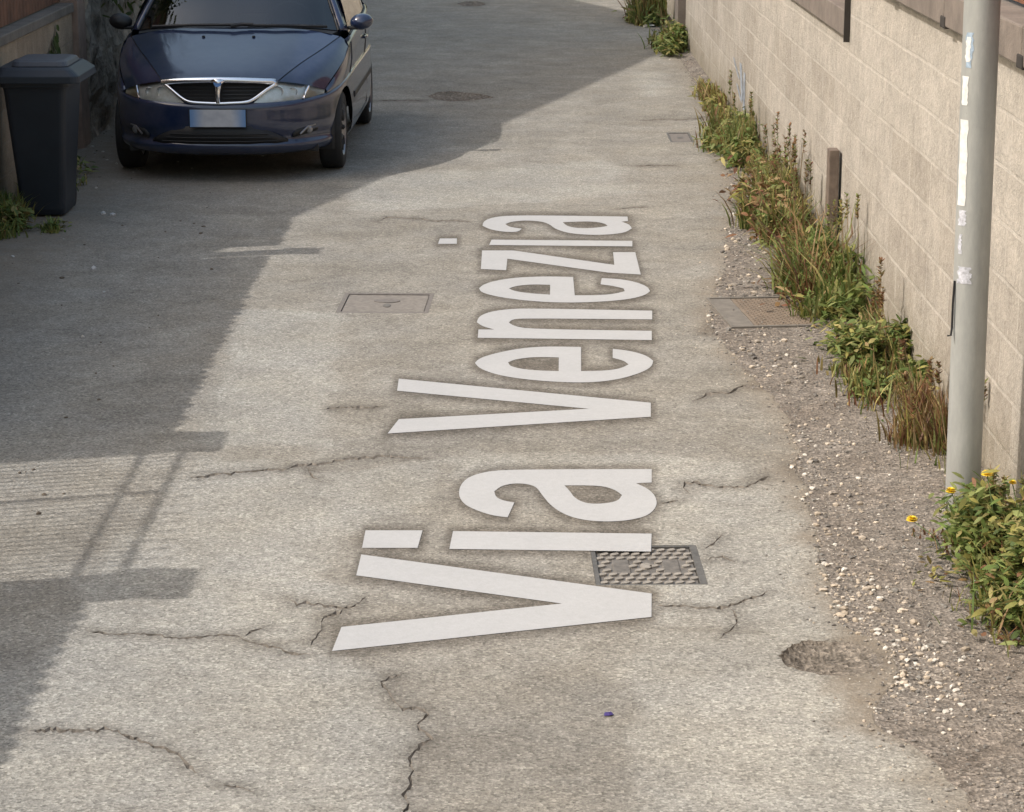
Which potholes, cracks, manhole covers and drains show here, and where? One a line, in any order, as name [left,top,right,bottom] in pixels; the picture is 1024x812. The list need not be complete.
crack [657,591,767,640]
crack [693,385,762,402]
manhole cover [666,132,694,142]
pothole [778,640,885,677]
crack [90,597,366,655]
manhole cover [336,293,434,313]
crack [196,455,423,482]
crack [380,674,434,812]
crack [30,726,197,773]
crack [662,476,768,504]
